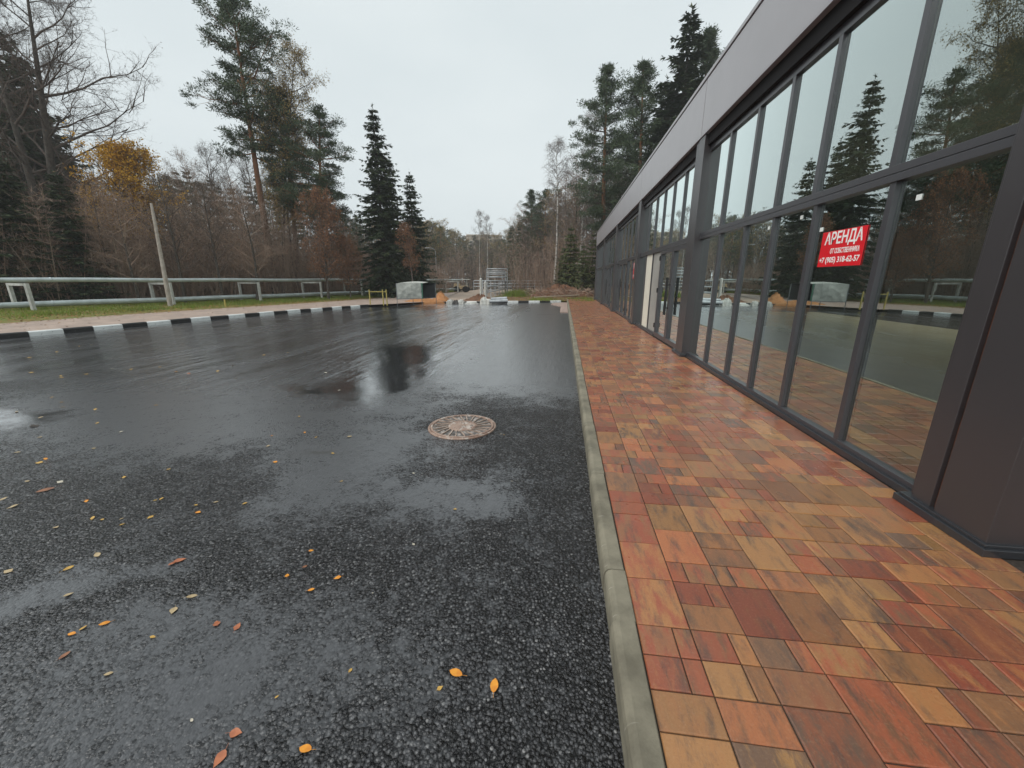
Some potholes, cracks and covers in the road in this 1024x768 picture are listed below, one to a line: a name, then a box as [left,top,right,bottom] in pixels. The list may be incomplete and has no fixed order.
manhole cover [428,415,496,440]
